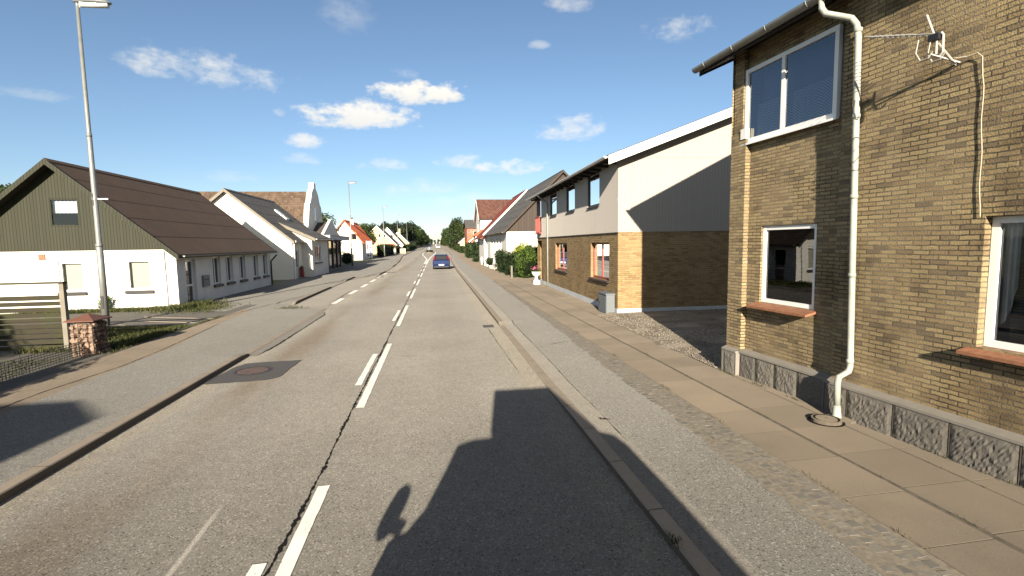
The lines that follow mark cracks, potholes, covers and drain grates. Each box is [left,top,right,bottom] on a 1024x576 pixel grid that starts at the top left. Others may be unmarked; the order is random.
manhole cover [808,414,846,427]
crack [263,265,425,576]
manhole cover [233,366,273,375]
